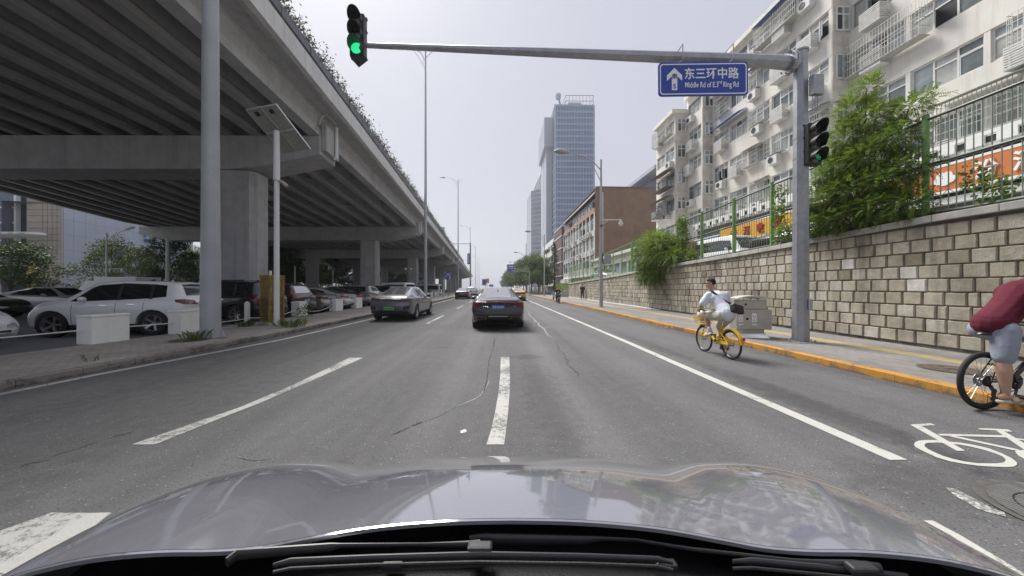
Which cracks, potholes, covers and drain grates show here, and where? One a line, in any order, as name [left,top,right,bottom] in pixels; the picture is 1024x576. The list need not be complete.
manhole cover [916,364,993,376]
manhole cover [972,479,1024,520]
crack [526,309,579,376]
crack [391,339,495,435]
